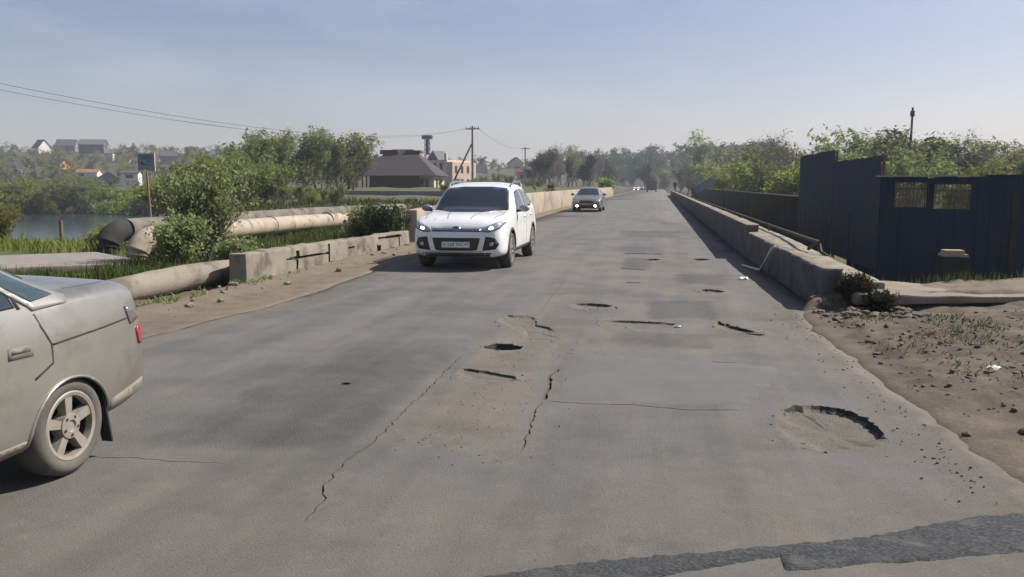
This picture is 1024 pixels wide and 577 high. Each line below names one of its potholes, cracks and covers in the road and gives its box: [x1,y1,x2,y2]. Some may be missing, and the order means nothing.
pothole [712,321,767,337]
crack [305,357,460,522]
pothole [452,368,517,386]
crack [521,369,684,450]
pothole [496,315,562,342]
pothole [773,405,891,453]
pothole [597,320,675,329]
